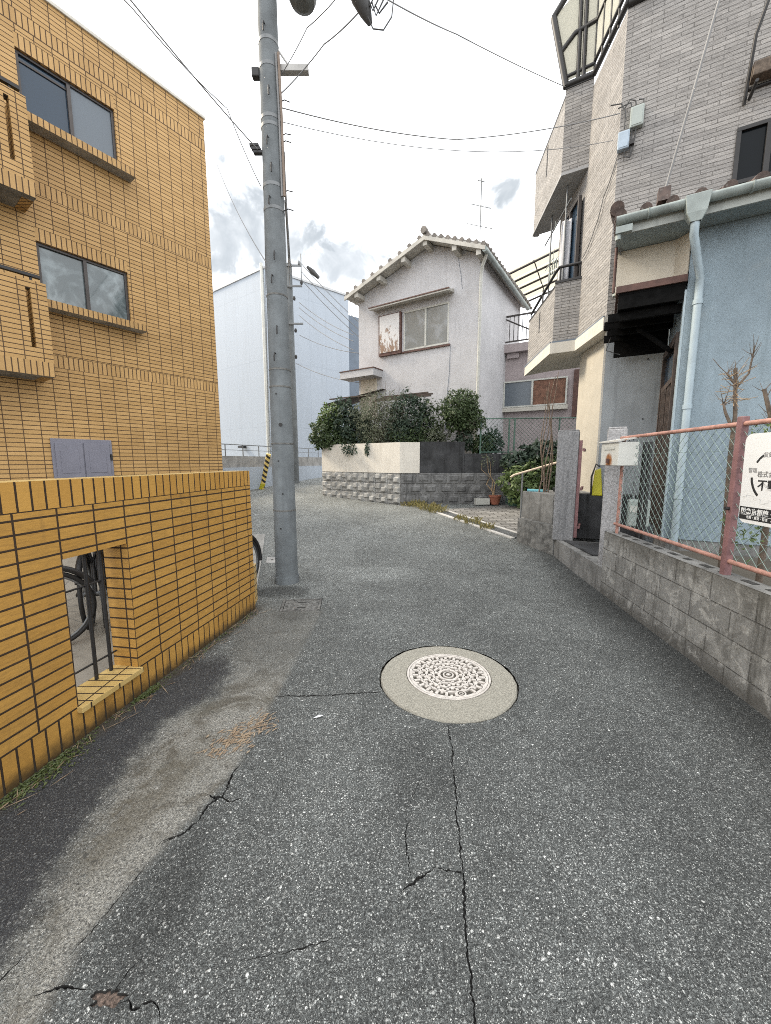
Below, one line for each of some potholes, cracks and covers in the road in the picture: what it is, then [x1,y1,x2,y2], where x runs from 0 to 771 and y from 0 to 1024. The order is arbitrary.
crack [156,767,241,847]
crack [70,866,145,955]
manhole cover [381,646,517,724]
crack [247,937,337,961]
utility cover [280,598,322,612]
crack [35,964,160,1017]
